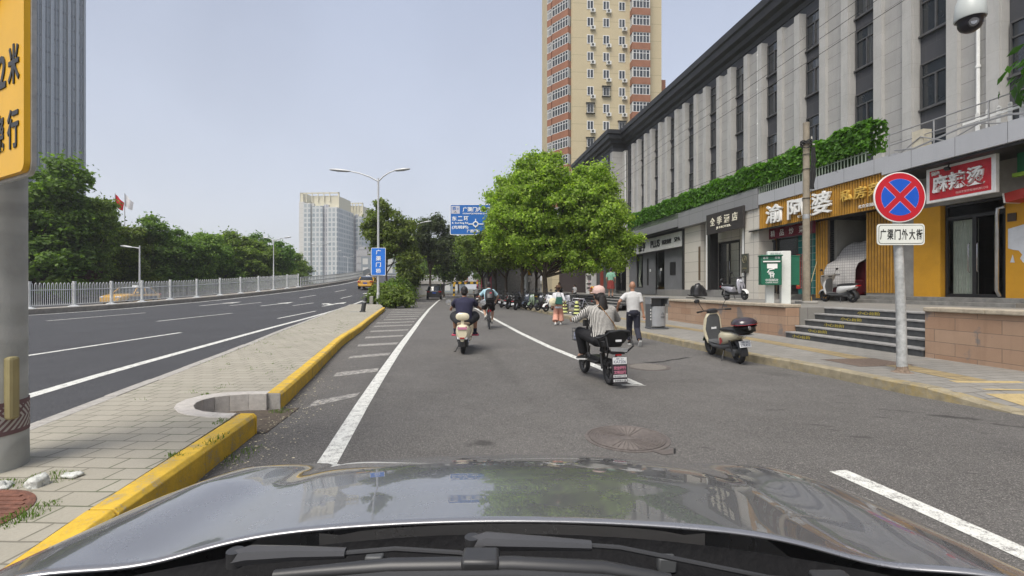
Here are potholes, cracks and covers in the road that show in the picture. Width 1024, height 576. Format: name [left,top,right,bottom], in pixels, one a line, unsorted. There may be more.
manhole cover [627,363,671,371]
manhole cover [585,425,676,455]
manhole cover [0,489,37,525]
